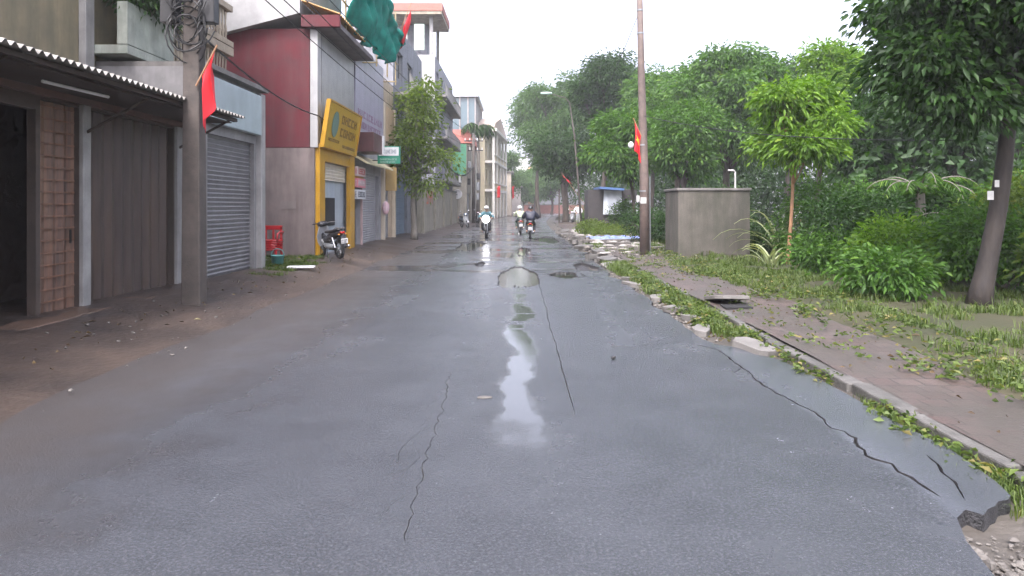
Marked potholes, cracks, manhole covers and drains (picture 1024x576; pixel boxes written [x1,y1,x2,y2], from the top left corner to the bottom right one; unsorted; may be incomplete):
pothole [549,271,578,279]
crack [378,372,452,541]
pothole [496,266,540,288]
pothole [573,261,599,271]
crack [699,345,965,500]
